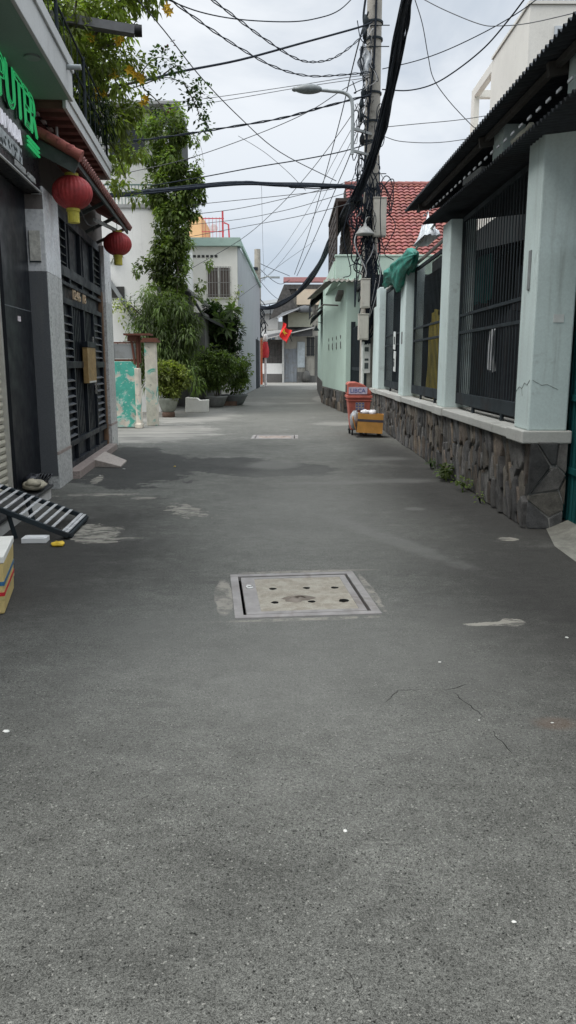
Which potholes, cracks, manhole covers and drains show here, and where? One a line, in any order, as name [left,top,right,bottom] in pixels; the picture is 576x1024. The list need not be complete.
crack [447,685,512,753]
manhole cover [230,571,382,619]
